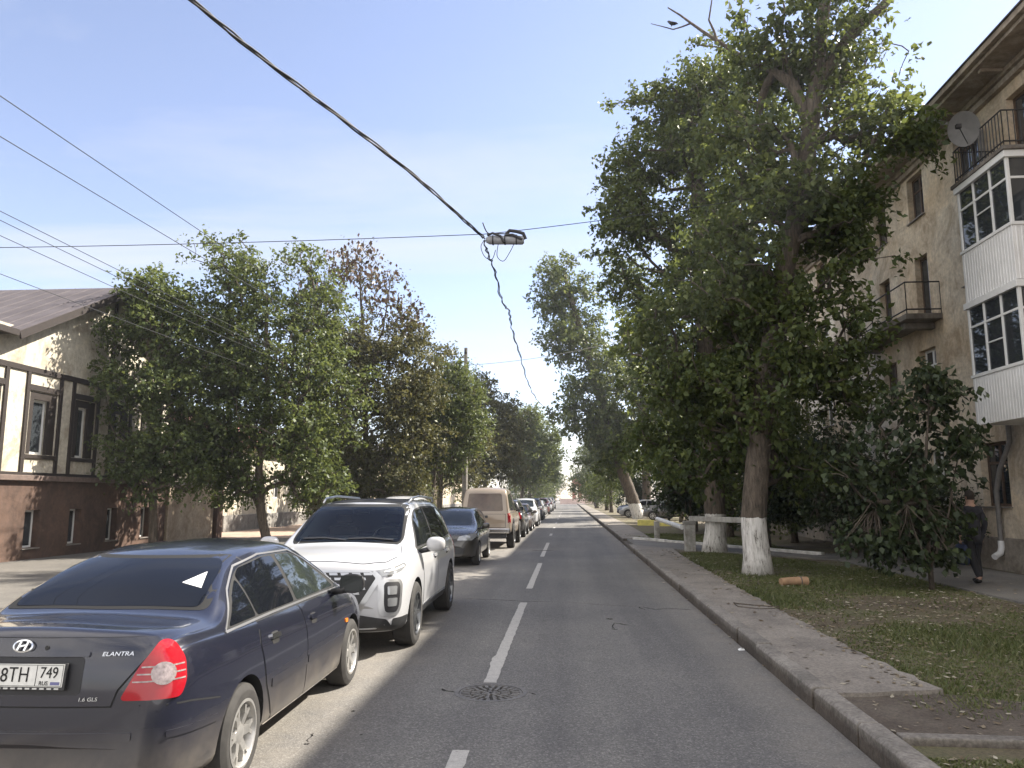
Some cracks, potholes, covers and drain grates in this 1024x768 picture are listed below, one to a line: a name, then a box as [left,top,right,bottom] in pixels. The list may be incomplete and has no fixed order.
manhole cover [454,683,527,702]
